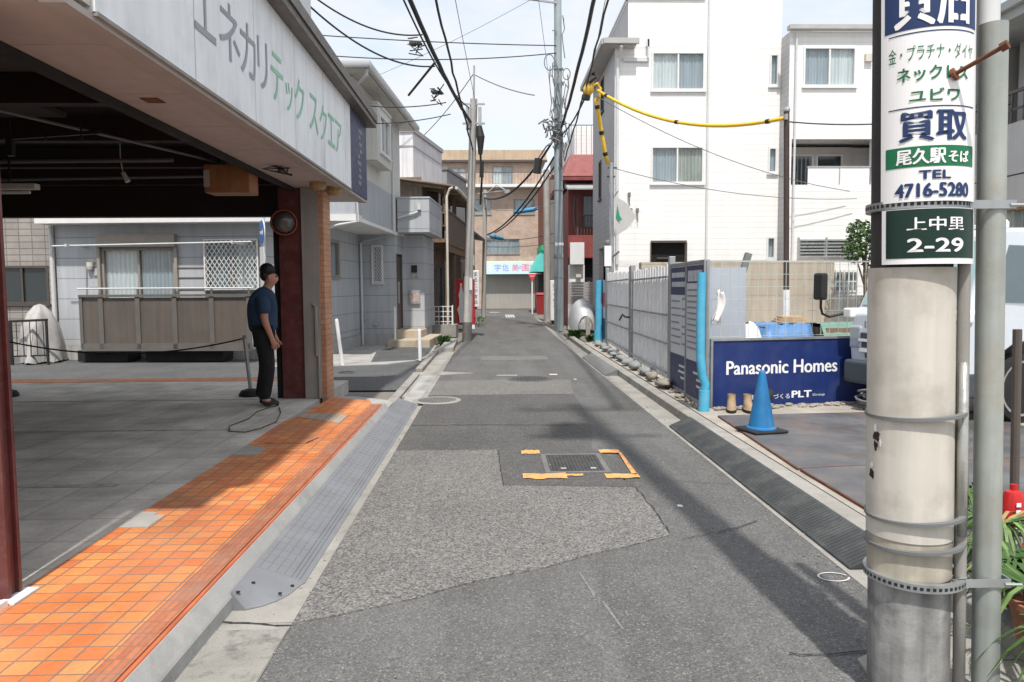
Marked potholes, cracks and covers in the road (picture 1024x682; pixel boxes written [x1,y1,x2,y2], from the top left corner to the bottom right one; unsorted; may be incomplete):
manhole cover [413,396,461,404]
manhole cover [540,453,611,473]
